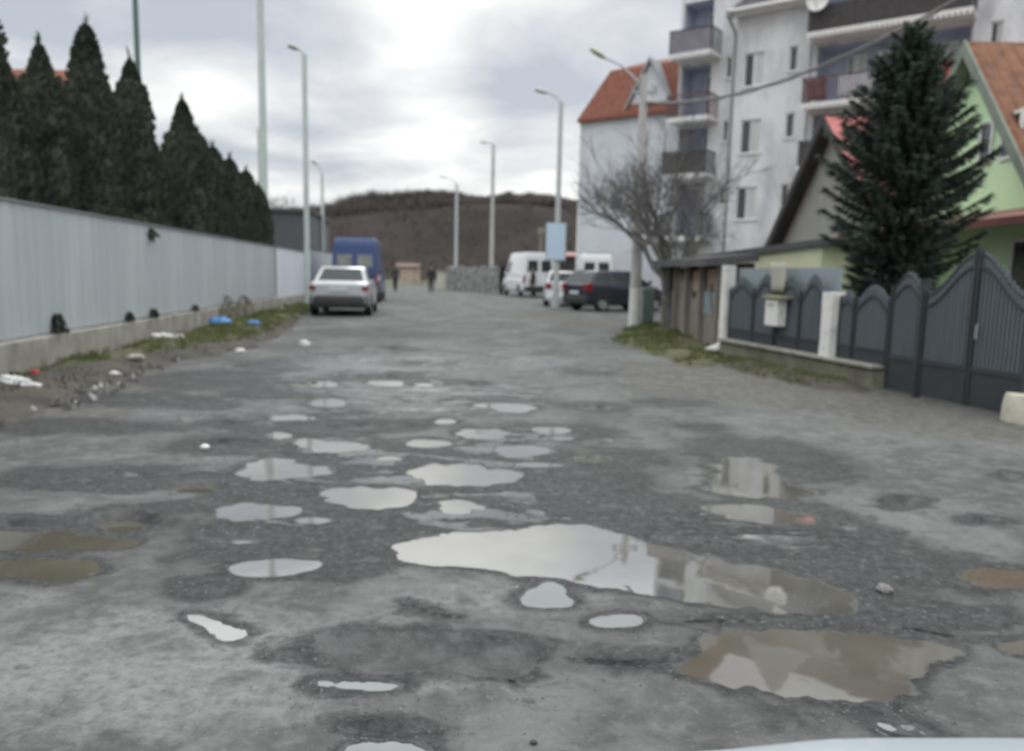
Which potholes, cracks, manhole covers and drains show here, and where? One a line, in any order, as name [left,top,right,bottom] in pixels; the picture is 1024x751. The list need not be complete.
pothole [955,565,1024,589]
pothole [184,612,250,641]
pothole [213,501,304,521]
pothole [877,495,925,509]
pothole [233,456,337,481]
pothole [318,485,418,510]
pothole [671,626,967,704]
pothole [0,529,141,553]
pothole [405,462,524,487]
pothole [308,677,404,691]
pothole [227,557,326,577]
pothole [390,522,858,615]
